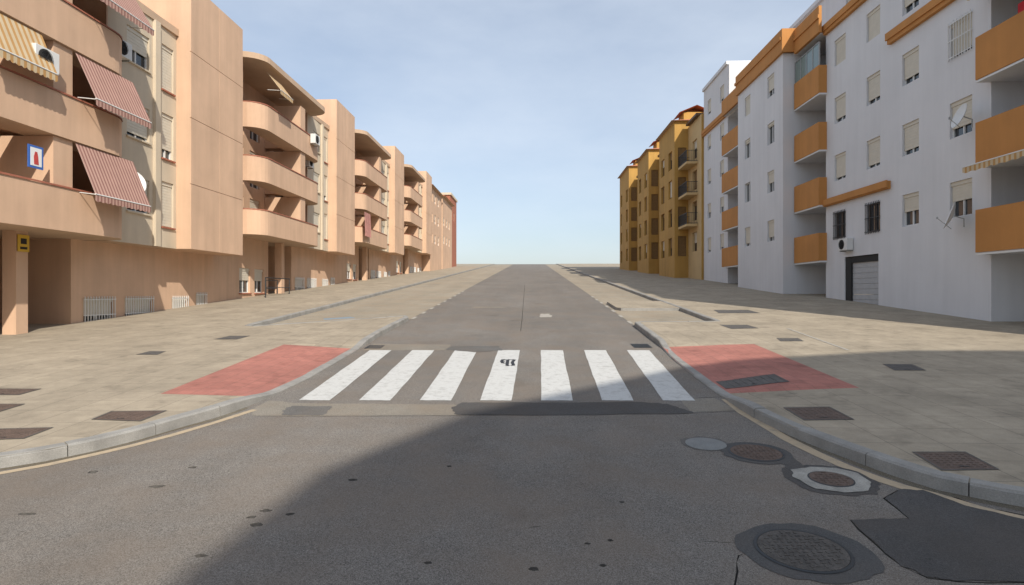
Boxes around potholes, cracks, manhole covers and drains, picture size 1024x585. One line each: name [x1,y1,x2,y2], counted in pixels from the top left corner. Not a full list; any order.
manhole cover [721,442,793,464]
utility cover [0,427,53,439]
crack [708,541,742,585]
manhole cover [680,436,728,451]
utility cover [913,451,998,470]
utility cover [93,410,167,421]
manhole cover [782,465,880,496]
utility cover [783,406,853,420]
manhole cover [735,523,885,584]
